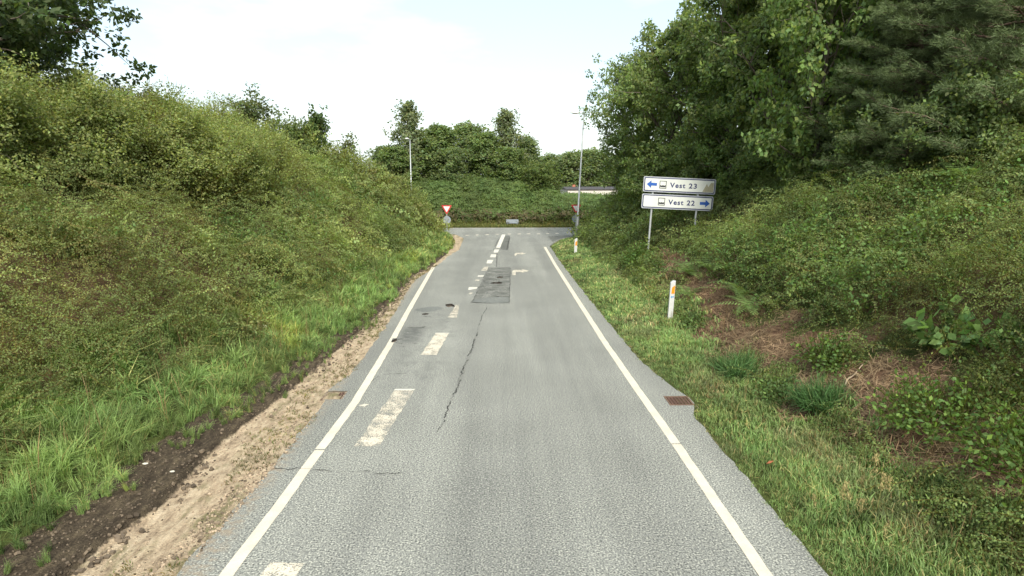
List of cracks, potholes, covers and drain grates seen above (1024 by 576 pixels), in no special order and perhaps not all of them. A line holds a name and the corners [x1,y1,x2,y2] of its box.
crack [437,253,511,432]
drain grate [663,396,695,406]
